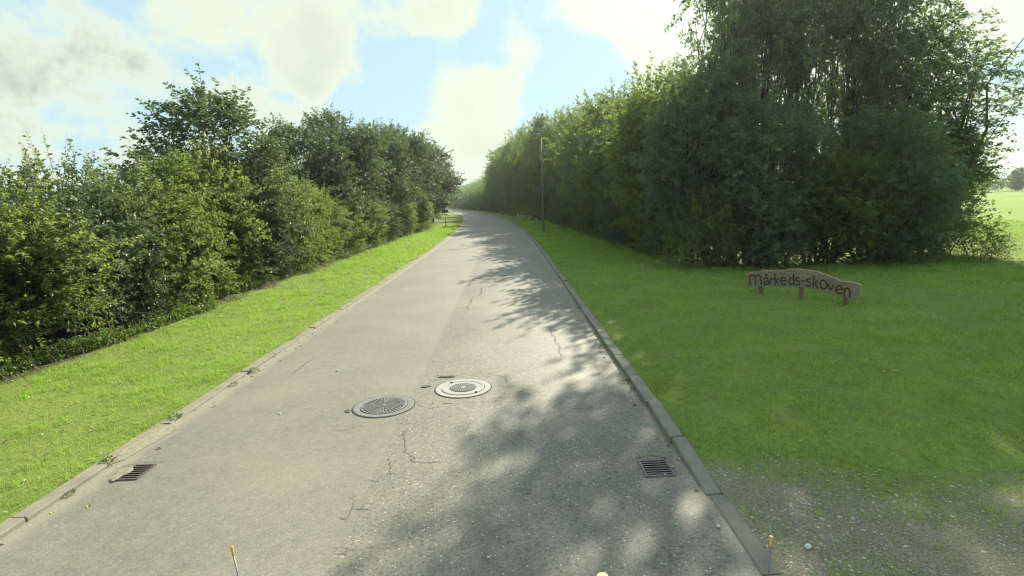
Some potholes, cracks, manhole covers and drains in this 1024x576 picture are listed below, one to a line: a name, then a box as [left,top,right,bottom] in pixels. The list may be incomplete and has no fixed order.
drain grate [638,459,676,477]
manhole cover [434,379,492,398]
drain grate [115,463,157,481]
manhole cover [352,395,416,418]
